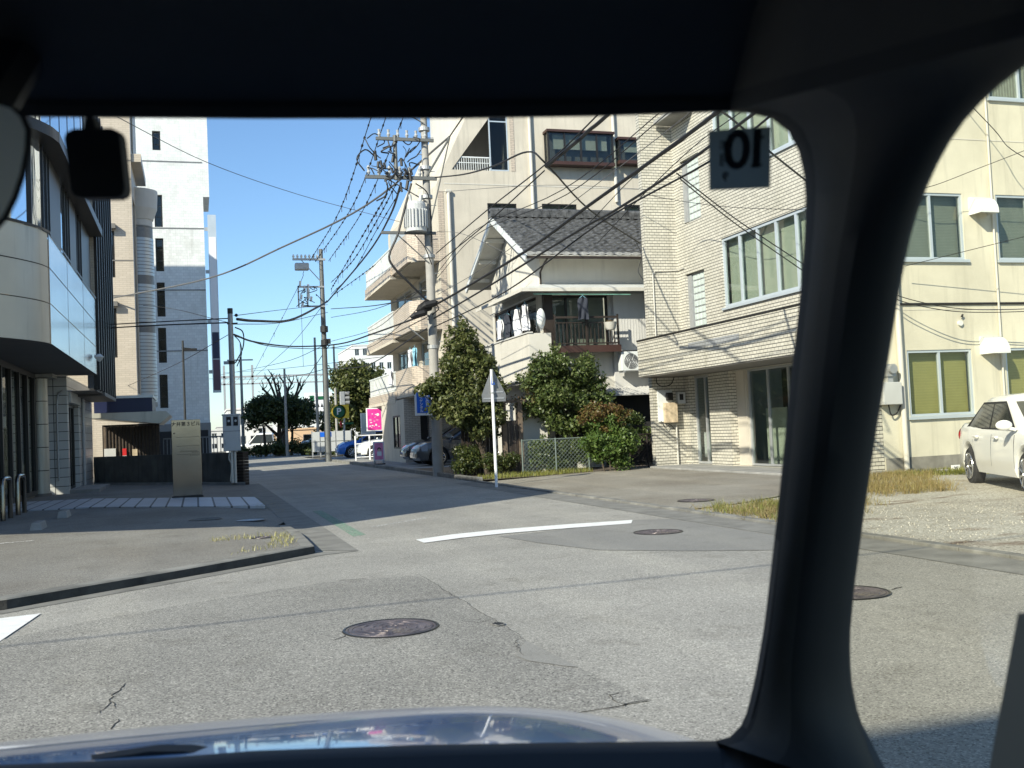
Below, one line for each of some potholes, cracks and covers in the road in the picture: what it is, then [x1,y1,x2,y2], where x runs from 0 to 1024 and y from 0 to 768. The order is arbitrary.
manhole cover [342,618,439,638]
crack [580,692,650,713]
manhole cover [853,585,892,600]
